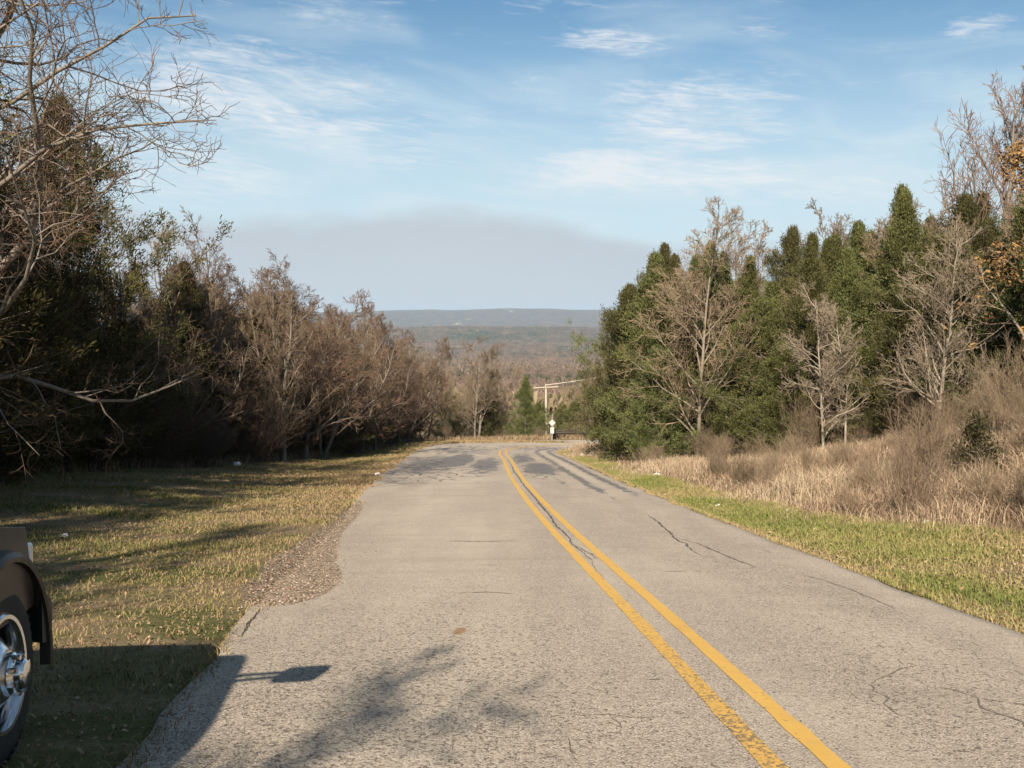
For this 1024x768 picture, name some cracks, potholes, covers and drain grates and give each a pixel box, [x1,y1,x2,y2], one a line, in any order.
crack [773,612,1024,752]
crack [511,465,604,579]
crack [648,515,807,574]
